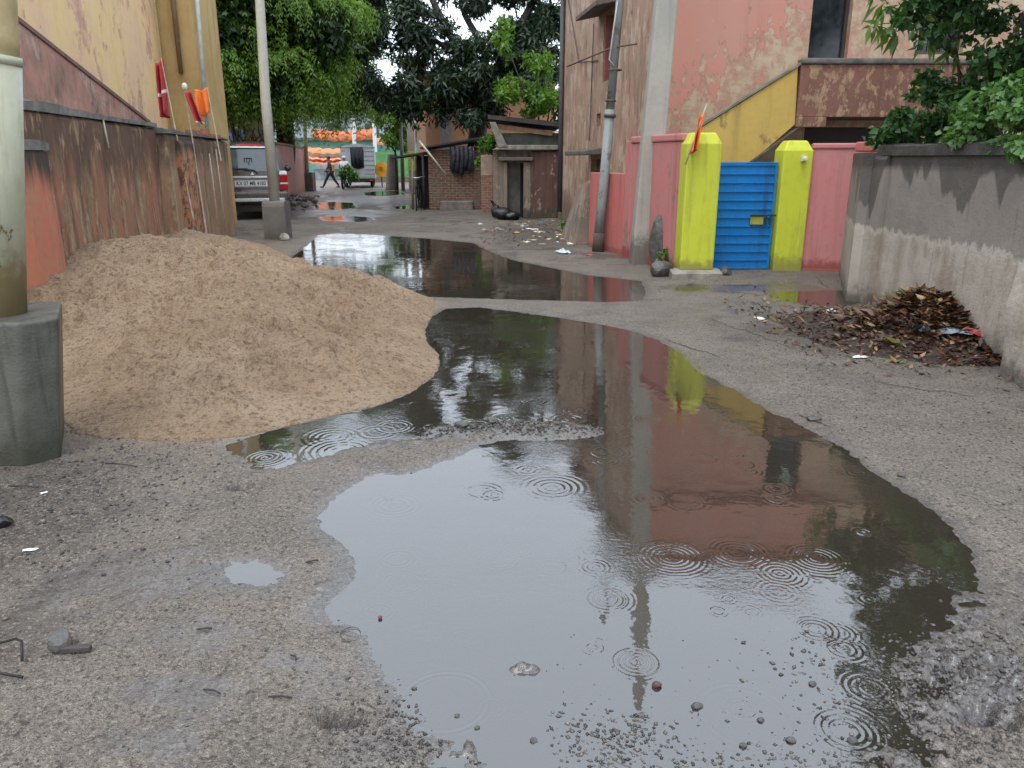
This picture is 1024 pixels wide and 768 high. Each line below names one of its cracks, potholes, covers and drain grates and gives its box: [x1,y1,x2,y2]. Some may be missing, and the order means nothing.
pothole [291,233,648,303]
pothole [221,306,990,768]
